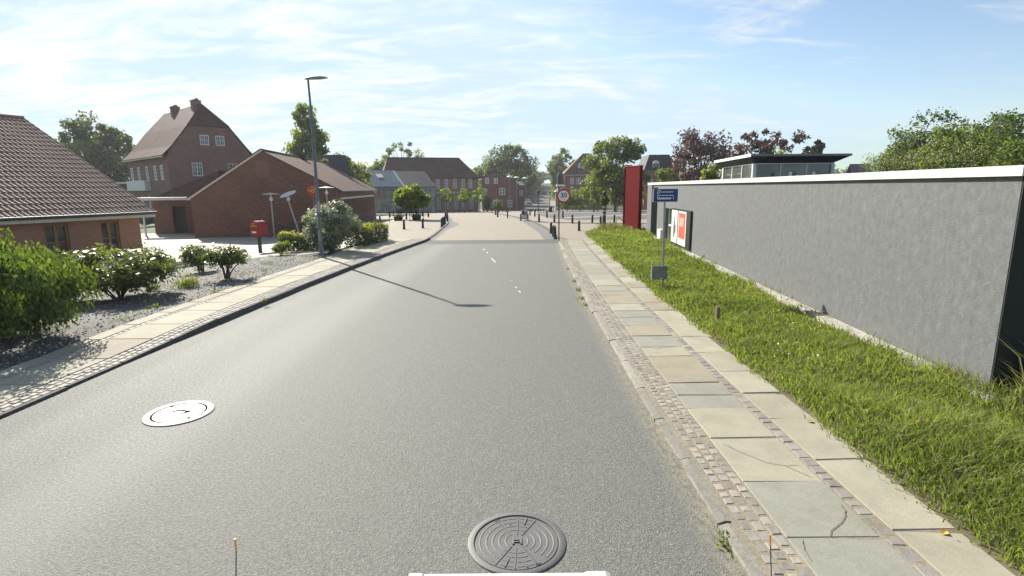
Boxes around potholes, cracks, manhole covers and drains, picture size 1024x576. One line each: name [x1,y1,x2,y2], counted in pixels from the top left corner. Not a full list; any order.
manhole cover [468,512,566,574]
manhole cover [141,400,215,427]
